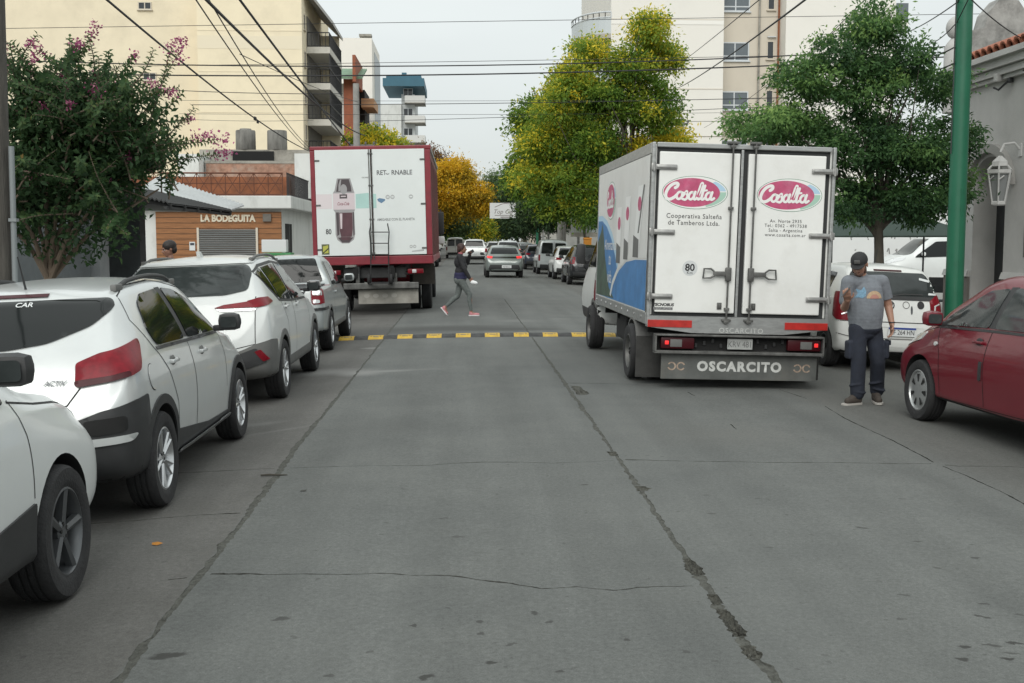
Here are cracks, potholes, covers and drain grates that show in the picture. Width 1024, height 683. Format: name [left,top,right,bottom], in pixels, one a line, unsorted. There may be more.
crack [210,573,681,591]
